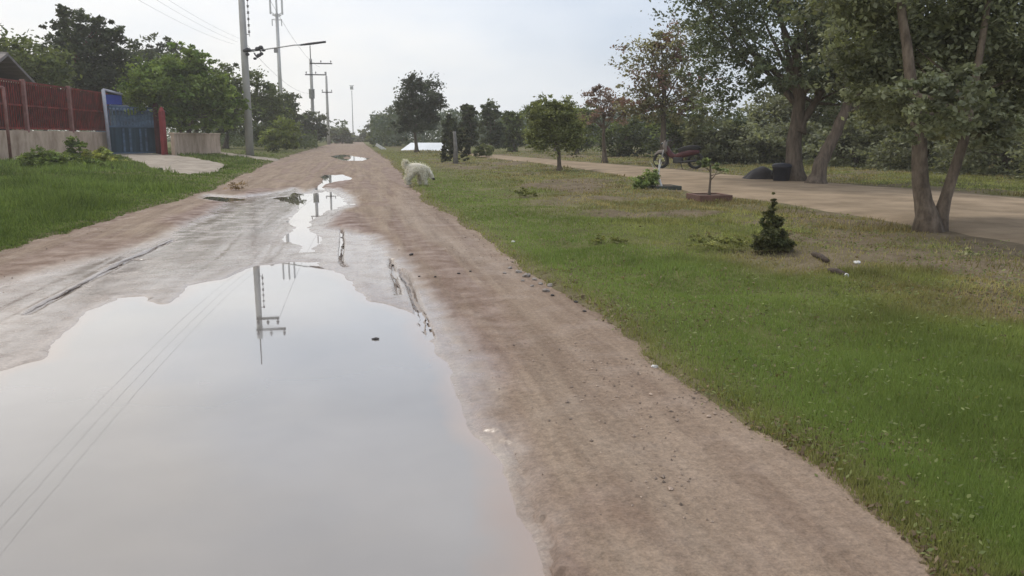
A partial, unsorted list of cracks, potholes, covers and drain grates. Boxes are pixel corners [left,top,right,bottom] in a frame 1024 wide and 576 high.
pothole [255,188,369,259]
pothole [0,259,554,576]
pothole [311,172,356,190]
